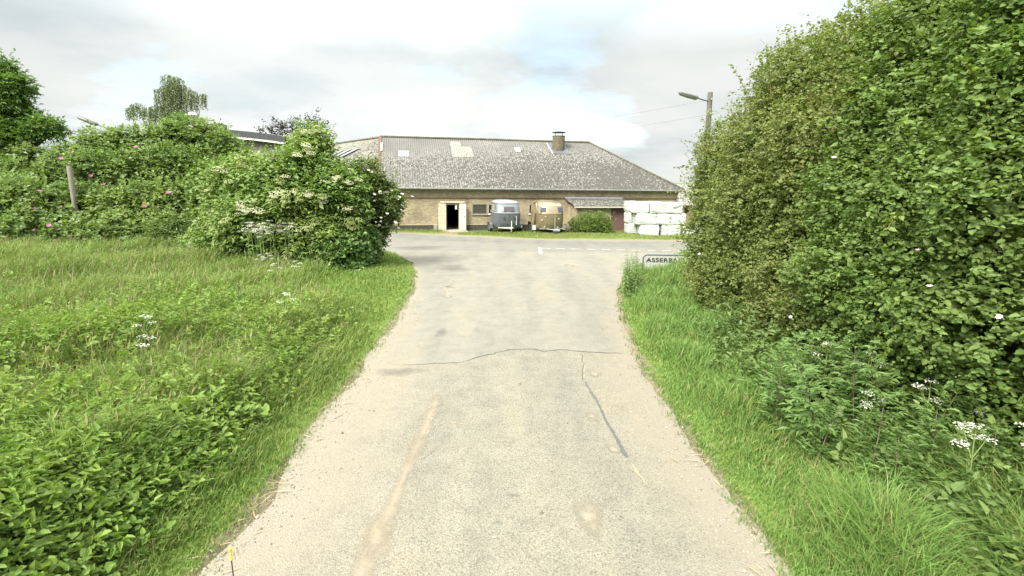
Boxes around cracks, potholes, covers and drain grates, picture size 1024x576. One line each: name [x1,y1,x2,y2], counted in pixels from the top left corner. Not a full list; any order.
crack [413,349,605,379]
